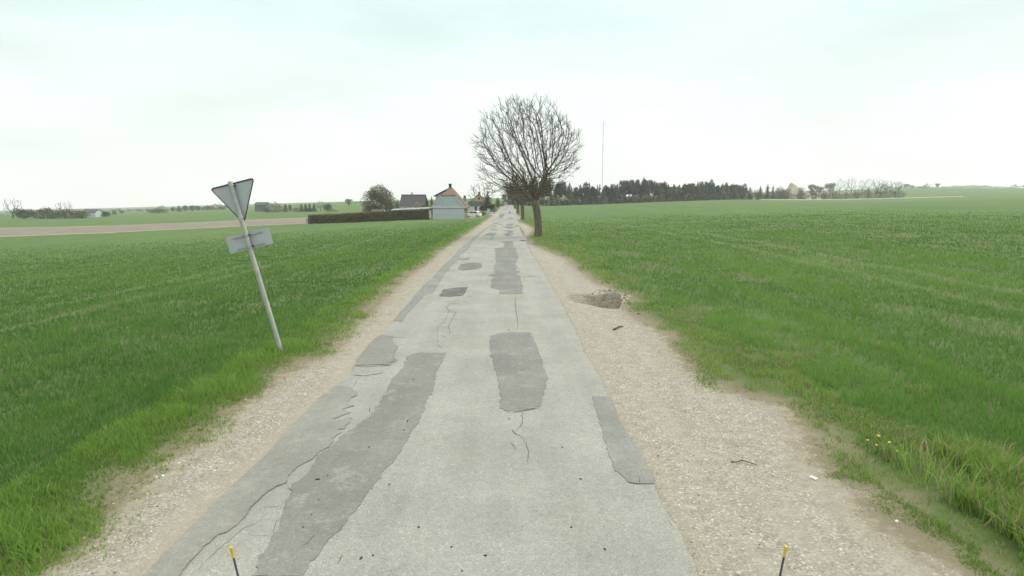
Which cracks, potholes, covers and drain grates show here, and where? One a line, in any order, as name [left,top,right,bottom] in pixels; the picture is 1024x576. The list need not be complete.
pothole [565,291,625,310]
crack [185,485,291,571]
crack [510,408,538,461]
